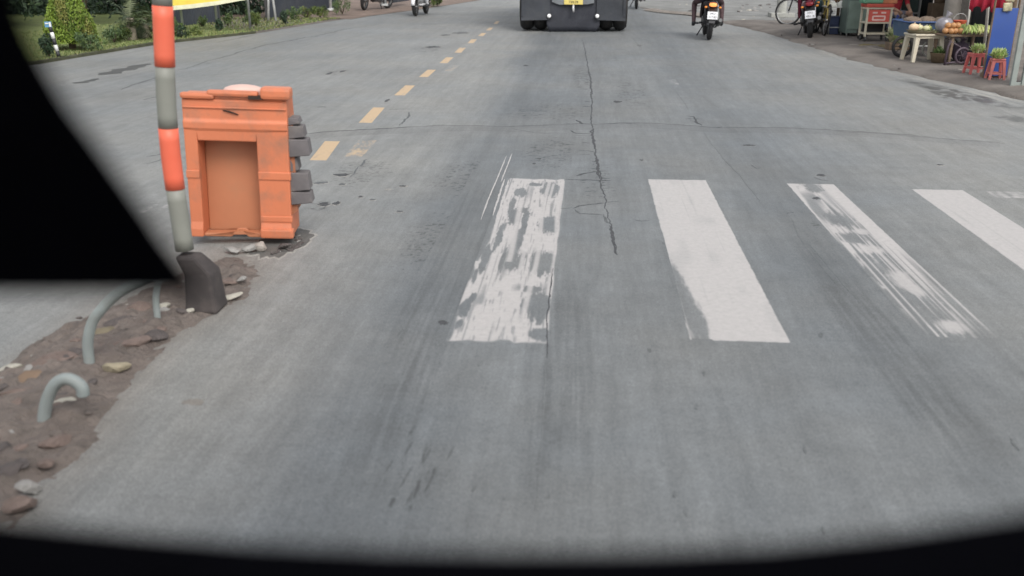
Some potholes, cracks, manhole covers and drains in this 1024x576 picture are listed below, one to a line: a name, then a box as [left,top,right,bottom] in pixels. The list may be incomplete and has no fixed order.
crack [308,45,1003,255]
pothole [245,227,318,261]
